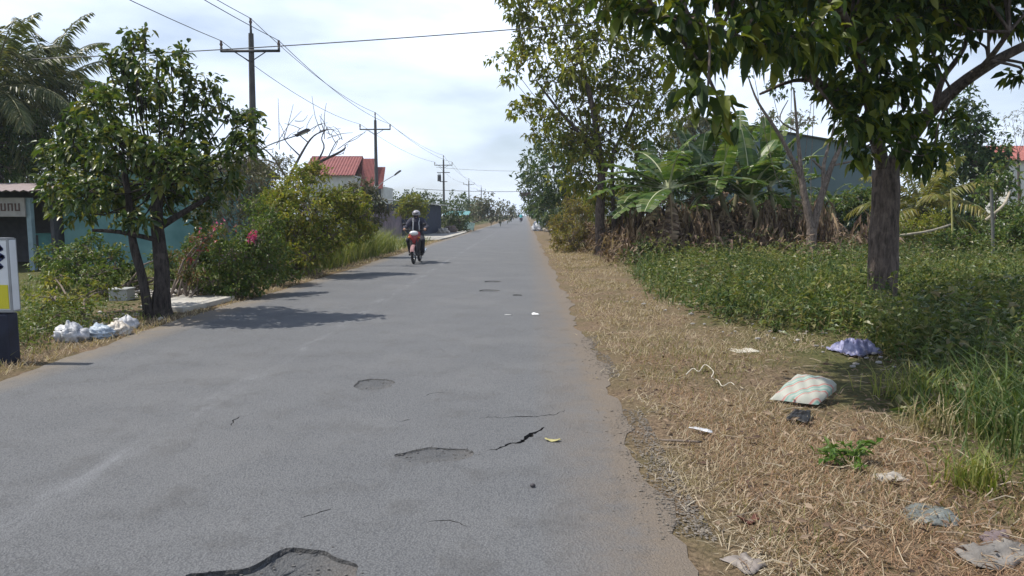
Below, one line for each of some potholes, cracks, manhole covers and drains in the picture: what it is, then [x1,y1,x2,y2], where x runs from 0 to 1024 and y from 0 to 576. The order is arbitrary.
crack [486,410,565,450]
pothole [394,446,480,463]
pothole [186,544,364,576]
pothole [354,378,395,391]
